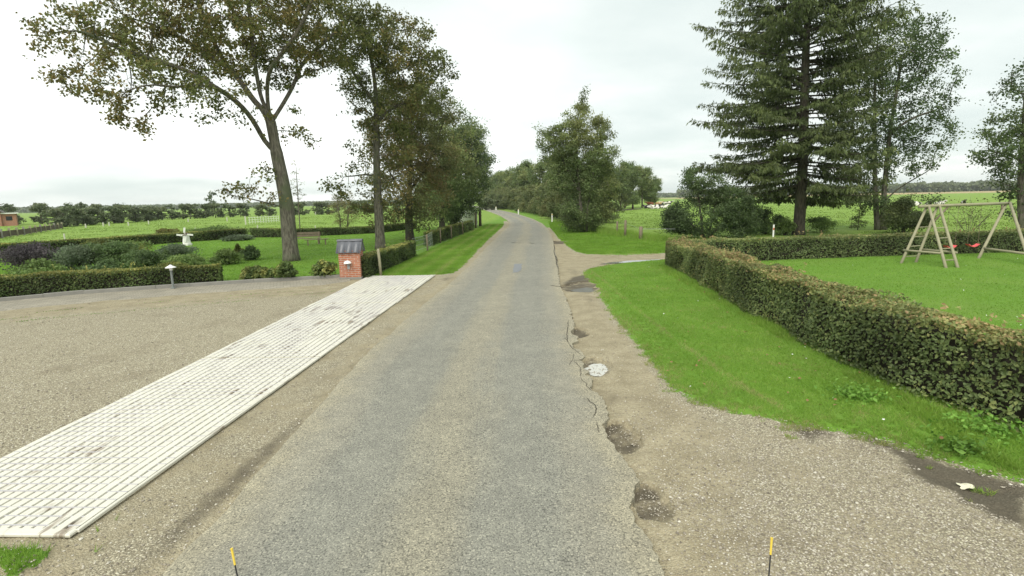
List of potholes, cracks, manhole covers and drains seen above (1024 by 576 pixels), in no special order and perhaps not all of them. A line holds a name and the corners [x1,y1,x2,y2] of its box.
pothole [573,325,595,341]
pothole [630,472,689,535]
crack [566,319,599,432]
pothole [560,278,601,296]
pothole [603,413,658,467]
